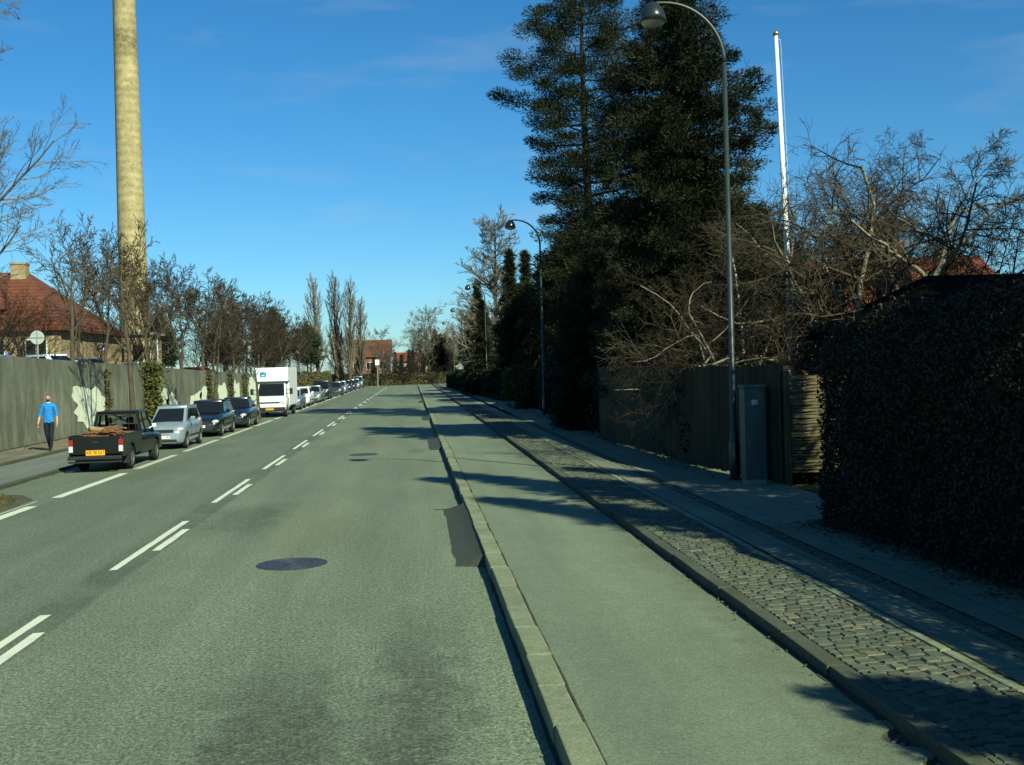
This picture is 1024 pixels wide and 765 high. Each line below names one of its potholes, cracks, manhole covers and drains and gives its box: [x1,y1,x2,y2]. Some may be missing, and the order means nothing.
manhole cover [256,558,328,570]
